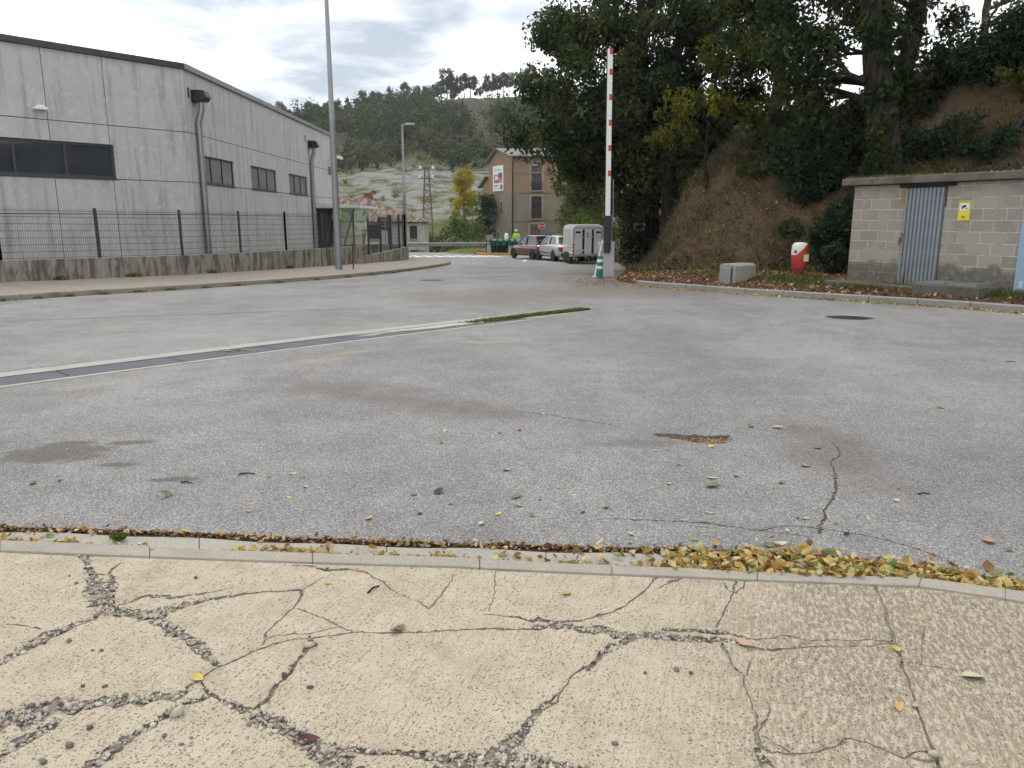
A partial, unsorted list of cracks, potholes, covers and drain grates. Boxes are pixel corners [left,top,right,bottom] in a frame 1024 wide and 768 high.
drain grate [341,330,421,340]
drain grate [262,337,354,349]
drain grate [169,346,276,361]
pothole [654,433,733,444]
crack [579,442,954,563]
drain grate [57,357,182,376]
drain grate [0,371,67,385]
